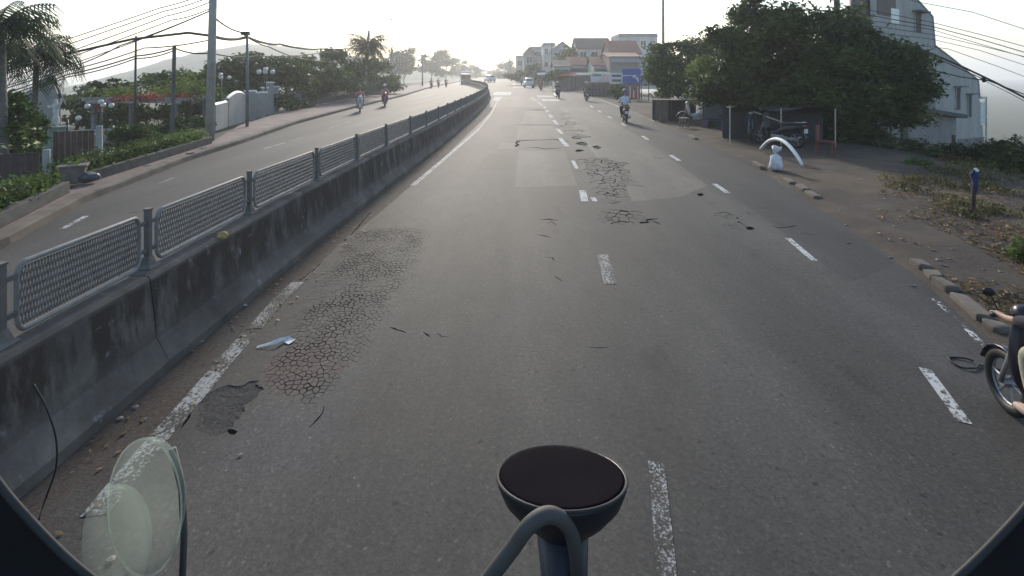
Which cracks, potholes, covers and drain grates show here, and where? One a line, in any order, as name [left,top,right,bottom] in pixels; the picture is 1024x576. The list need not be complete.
pothole [194,380,264,438]
crack [250,213,446,429]
crack [698,193,749,233]
crack [515,113,662,225]
